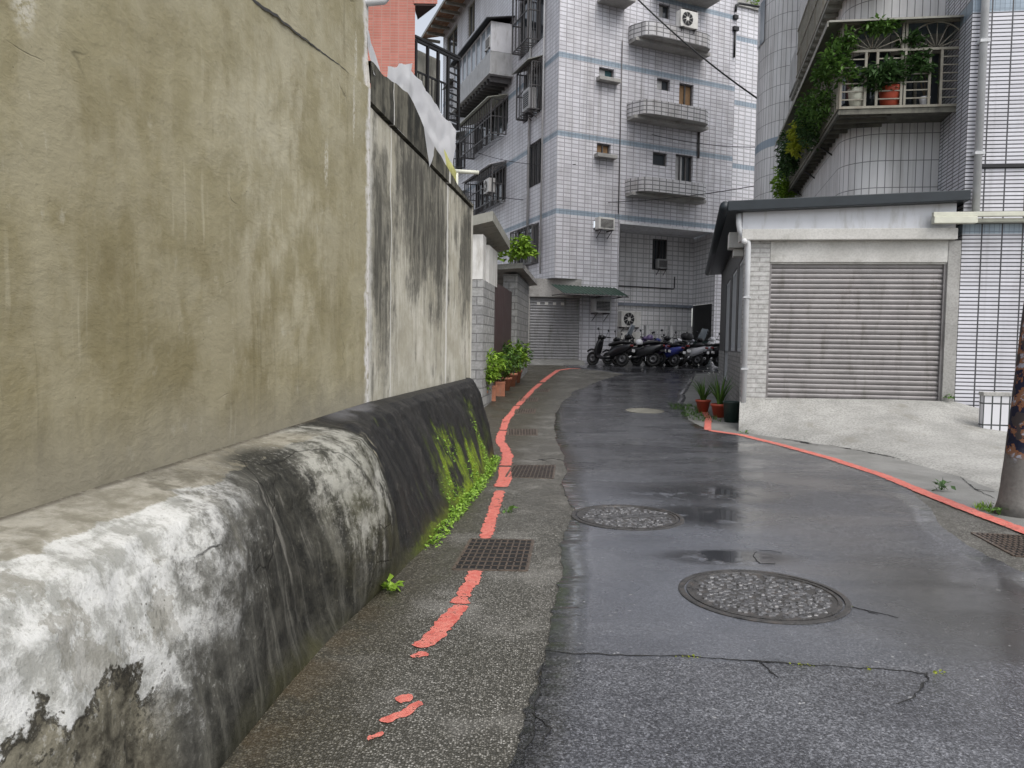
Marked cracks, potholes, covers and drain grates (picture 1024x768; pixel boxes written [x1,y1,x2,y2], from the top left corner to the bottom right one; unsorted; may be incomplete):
drain grate [452,538,535,572]
drain grate [505,465,556,479]
manhole cover [678,569,852,625]
manhole cover [571,504,684,531]
drain grate [971,532,1024,557]
crack [518,650,929,767]
